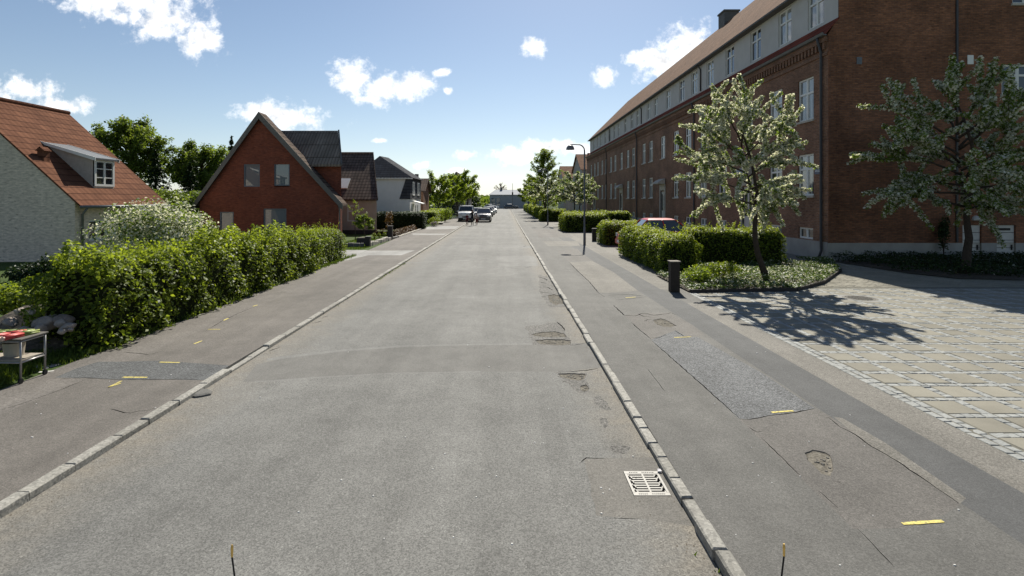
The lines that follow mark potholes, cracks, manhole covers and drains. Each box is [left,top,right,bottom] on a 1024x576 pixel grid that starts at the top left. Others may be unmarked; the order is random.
pothole [548,294,563,305]
drain grate [623,471,671,496]
pothole [559,373,586,381]
crack [745,409,811,468]
pothole [805,450,833,476]
pothole [654,318,676,327]
crack [828,417,958,503]
